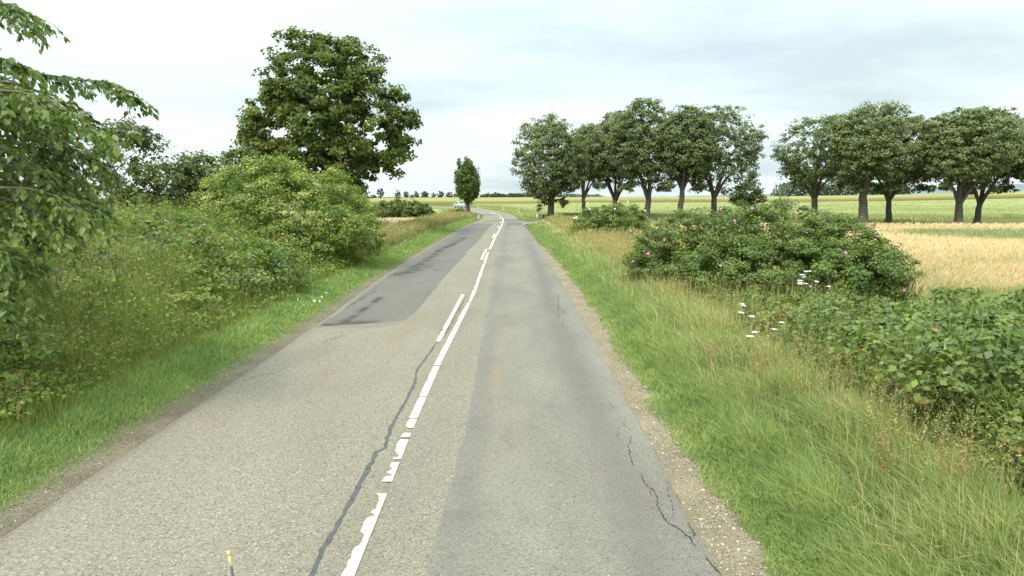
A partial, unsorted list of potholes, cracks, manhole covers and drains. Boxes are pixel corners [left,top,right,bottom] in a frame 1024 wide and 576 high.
crack [610,404,720,572]
